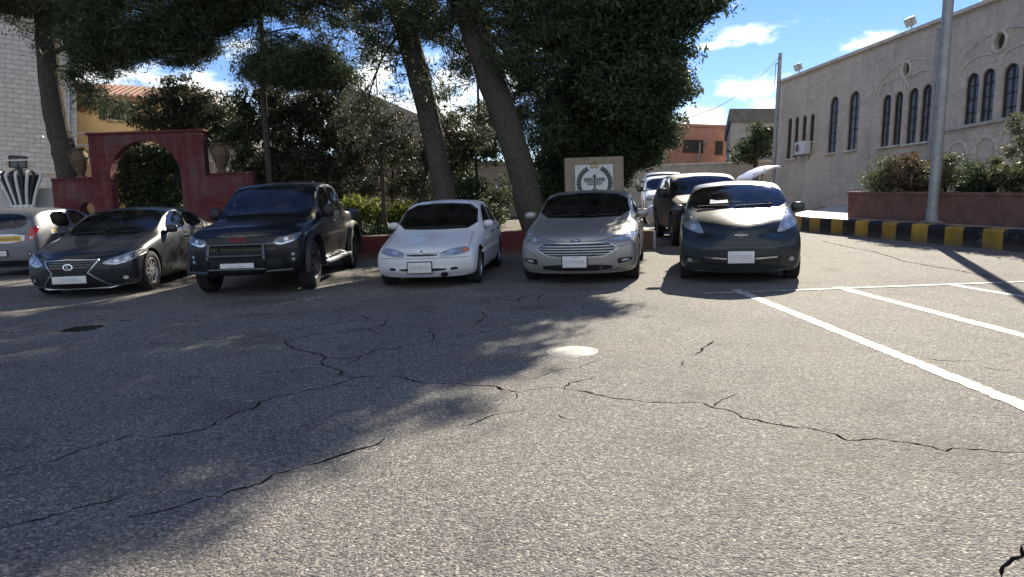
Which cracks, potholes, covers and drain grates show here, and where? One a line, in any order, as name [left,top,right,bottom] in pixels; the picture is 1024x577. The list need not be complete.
crack [823,241,996,279]
crack [1,433,135,472]
crack [99,306,1024,453]
crack [999,544,1024,577]
manhole cover [547,346,598,357]
crack [0,439,384,529]
